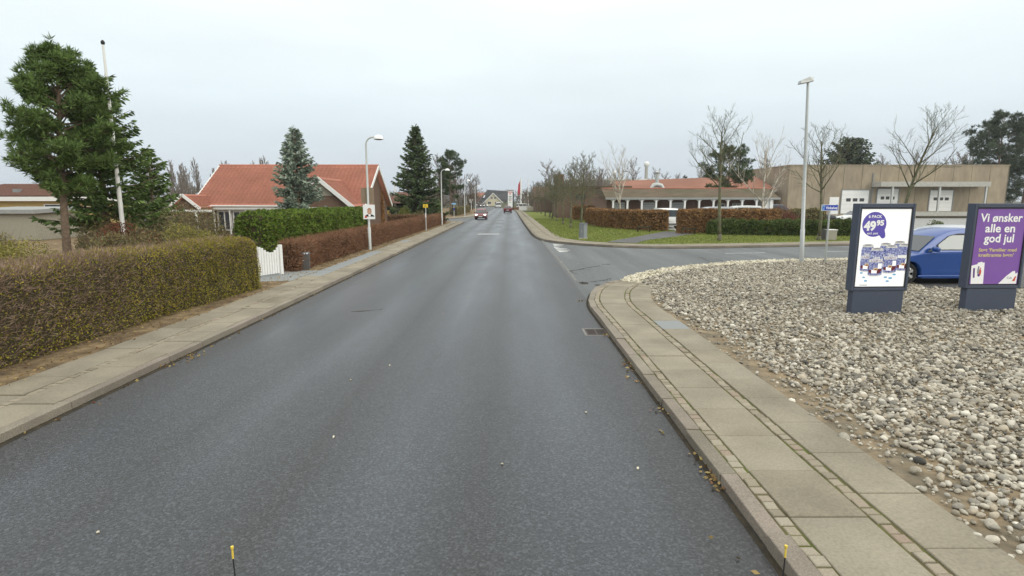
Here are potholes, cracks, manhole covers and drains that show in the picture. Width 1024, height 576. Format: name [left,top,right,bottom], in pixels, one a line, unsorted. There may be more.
drain grate [581,328,609,336]
